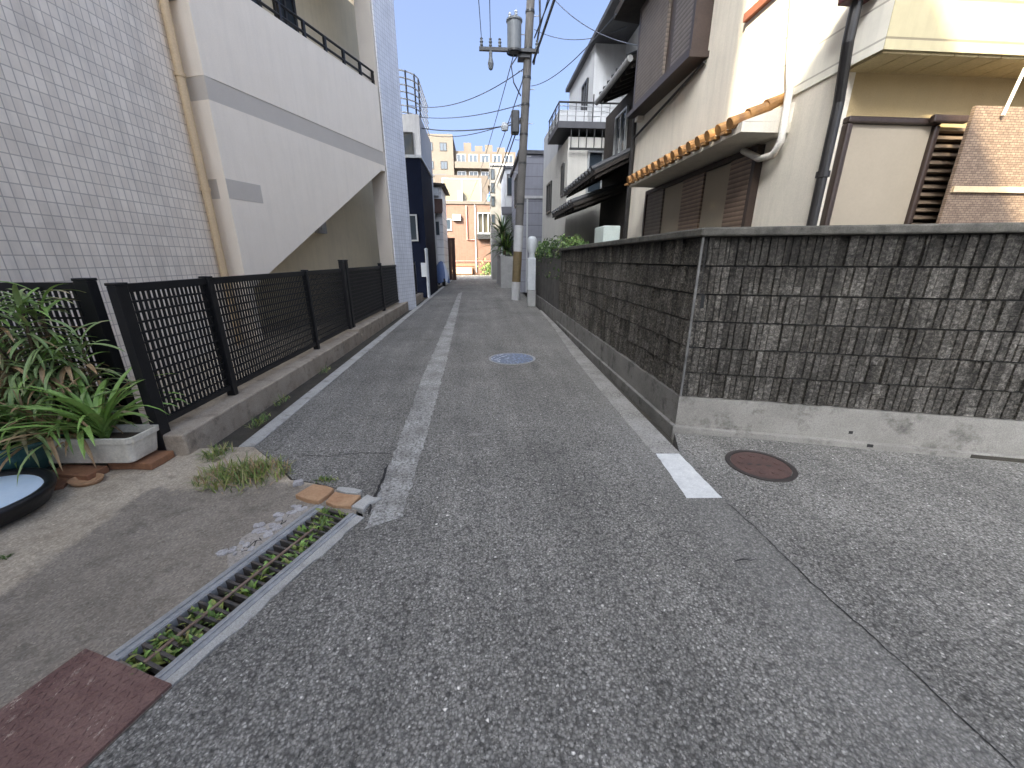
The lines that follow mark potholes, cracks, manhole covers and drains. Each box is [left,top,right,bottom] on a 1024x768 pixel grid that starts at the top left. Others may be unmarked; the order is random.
manhole cover [489,353,535,365]
manhole cover [725,450,798,482]
crack [302,452,388,514]
